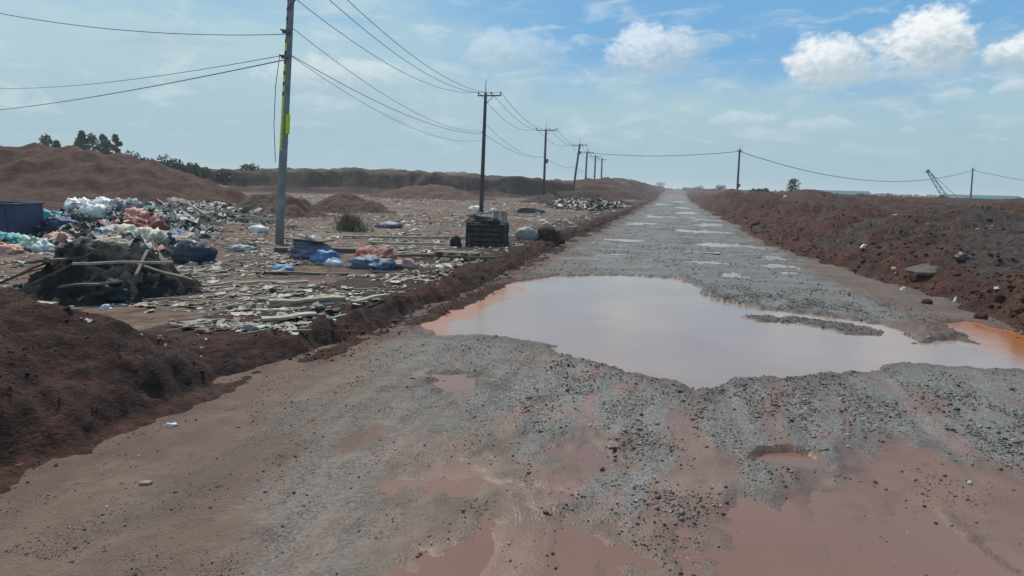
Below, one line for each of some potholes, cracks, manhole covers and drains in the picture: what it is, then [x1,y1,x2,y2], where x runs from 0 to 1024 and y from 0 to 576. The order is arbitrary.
pothole [745,442,827,471]
pothole [401,273,1024,395]
